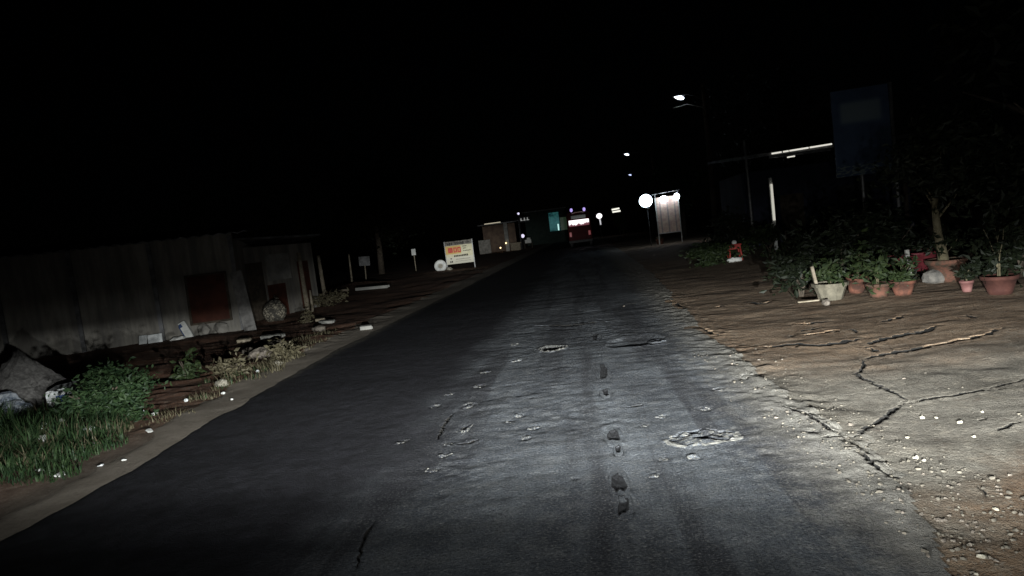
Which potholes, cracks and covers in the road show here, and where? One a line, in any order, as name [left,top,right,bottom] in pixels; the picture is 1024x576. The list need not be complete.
pothole [613,442,623,456]
pothole [607,468,630,503]
pothole [596,362,611,382]
pothole [604,426,624,448]
pothole [599,332,676,352]
pothole [613,489,634,520]
pothole [535,344,570,353]
pothole [659,426,746,450]
crack [775,359,1024,480]
crack [343,521,385,572]
crack [428,413,484,448]
